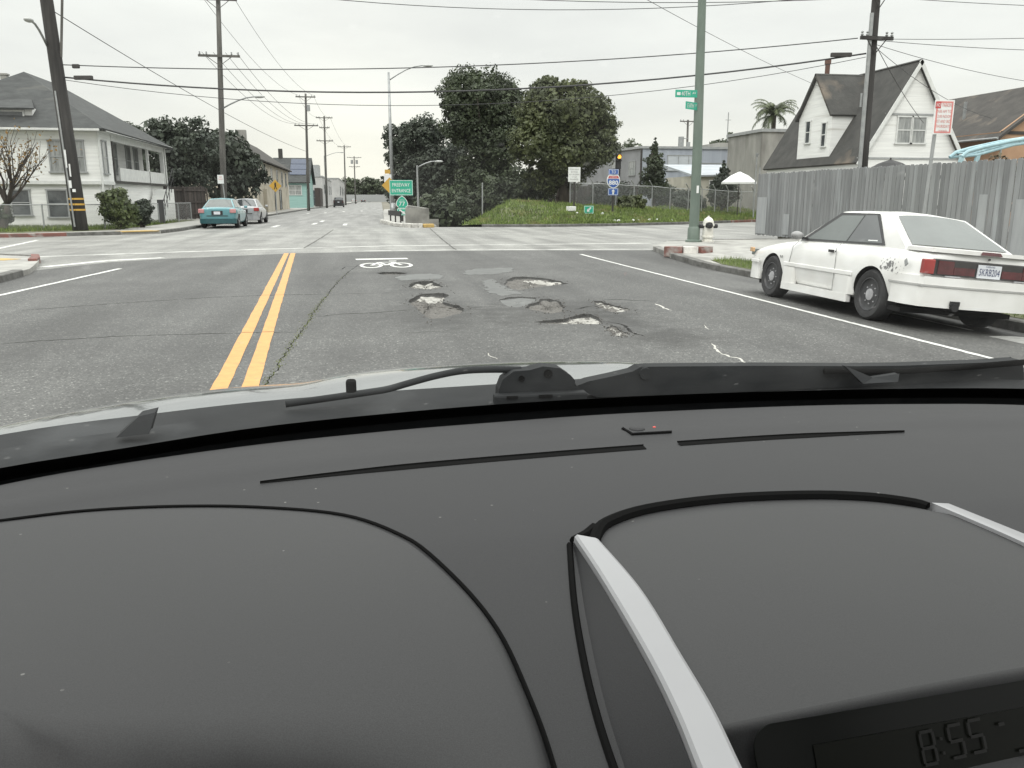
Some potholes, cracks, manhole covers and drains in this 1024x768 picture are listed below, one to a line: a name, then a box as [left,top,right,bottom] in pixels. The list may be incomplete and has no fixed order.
pothole [492,276,568,291]
pothole [403,290,471,325]
pothole [535,310,603,326]
pothole [603,323,635,338]
pothole [402,280,448,290]
pothole [588,299,637,314]
pothole [499,297,536,307]
pothole [511,296,571,314]
